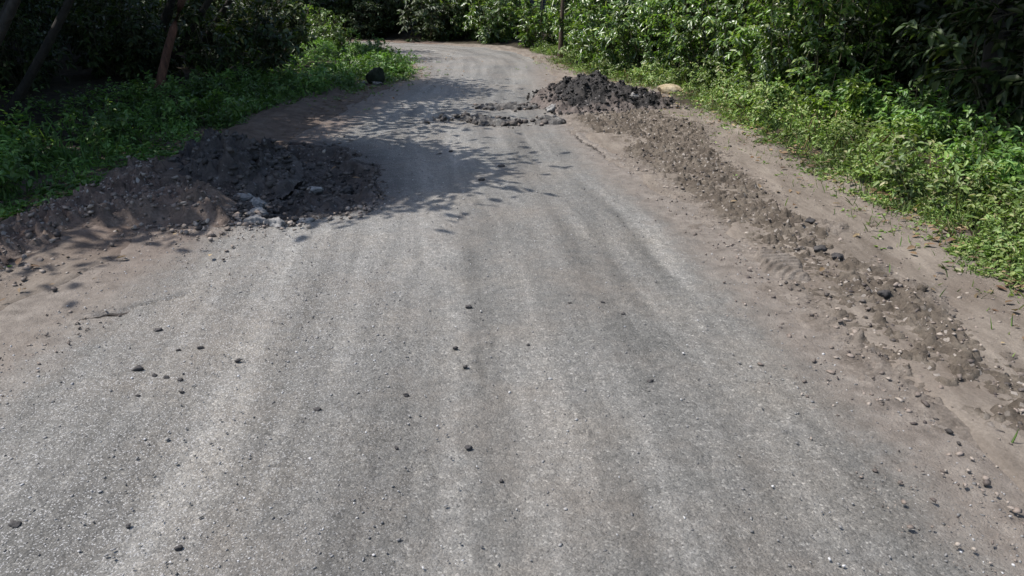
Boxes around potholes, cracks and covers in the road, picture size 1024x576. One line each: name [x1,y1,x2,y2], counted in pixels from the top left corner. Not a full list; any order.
pothole [480,102,538,110]
pothole [433,113,518,126]
pothole [535,115,563,125]
